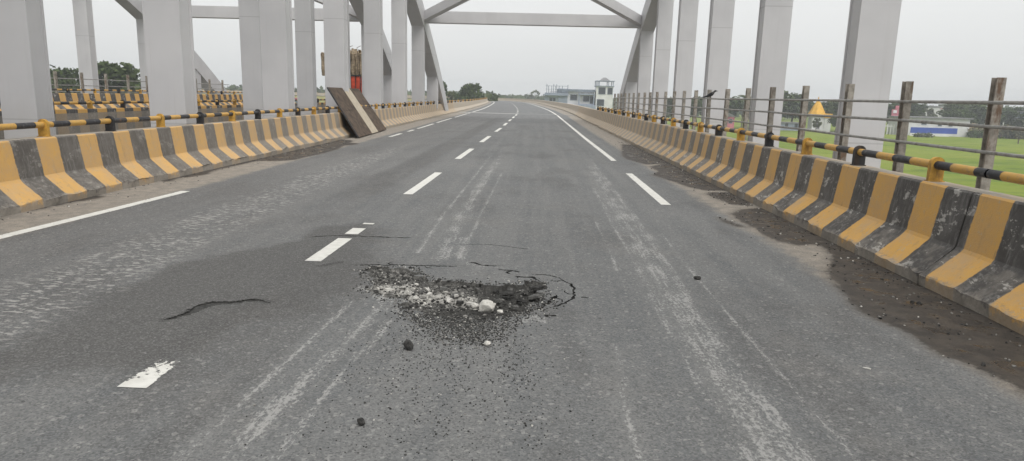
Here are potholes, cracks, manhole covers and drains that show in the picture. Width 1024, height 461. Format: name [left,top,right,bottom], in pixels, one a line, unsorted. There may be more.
pothole [367,266,548,318]
crack [164,299,270,320]
